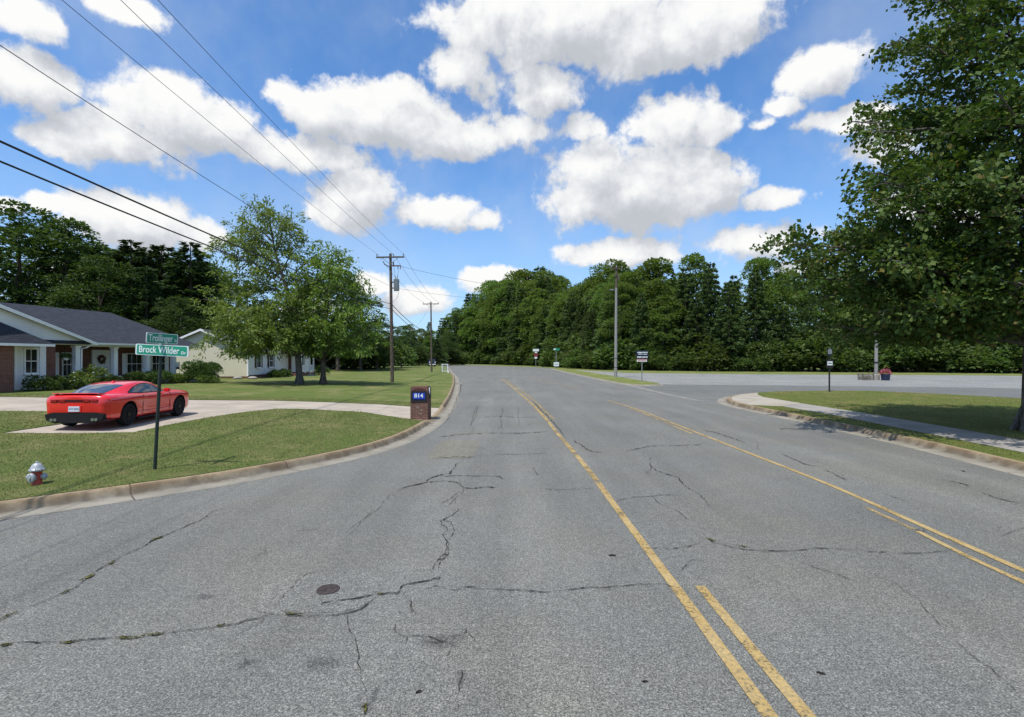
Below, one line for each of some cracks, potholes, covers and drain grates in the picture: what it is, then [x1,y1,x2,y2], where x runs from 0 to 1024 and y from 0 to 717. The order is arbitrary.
crack [440,404,602,453]
crack [655,538,1016,690]
crack [633,429,758,506]
manhole cover [316,584,340,595]
crack [0,463,633,713]
